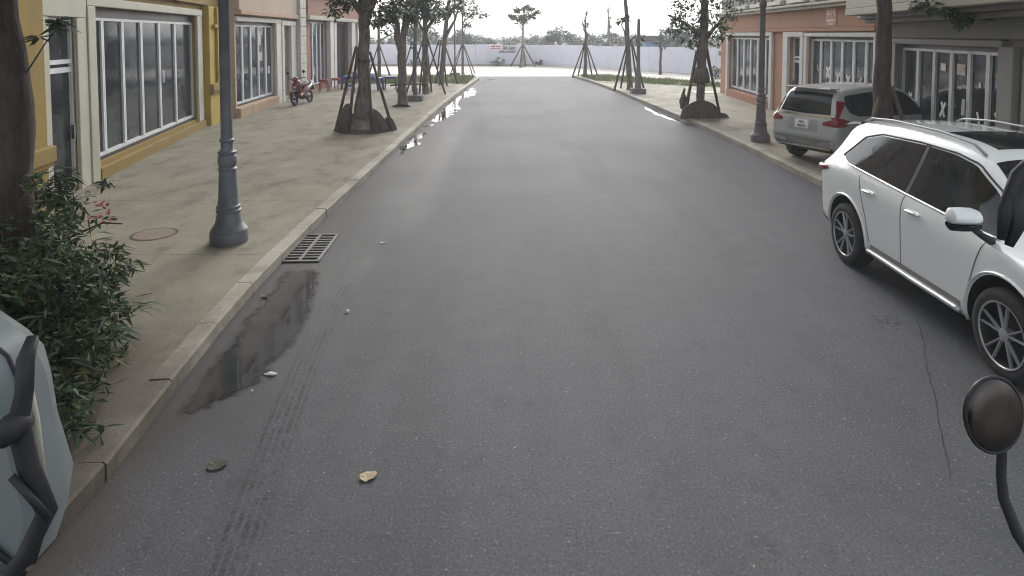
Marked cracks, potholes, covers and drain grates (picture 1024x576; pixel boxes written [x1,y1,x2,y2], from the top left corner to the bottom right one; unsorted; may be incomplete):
crack [916,315,952,482]
drain grate [282,233,339,263]
manhole cover [129,228,178,241]
